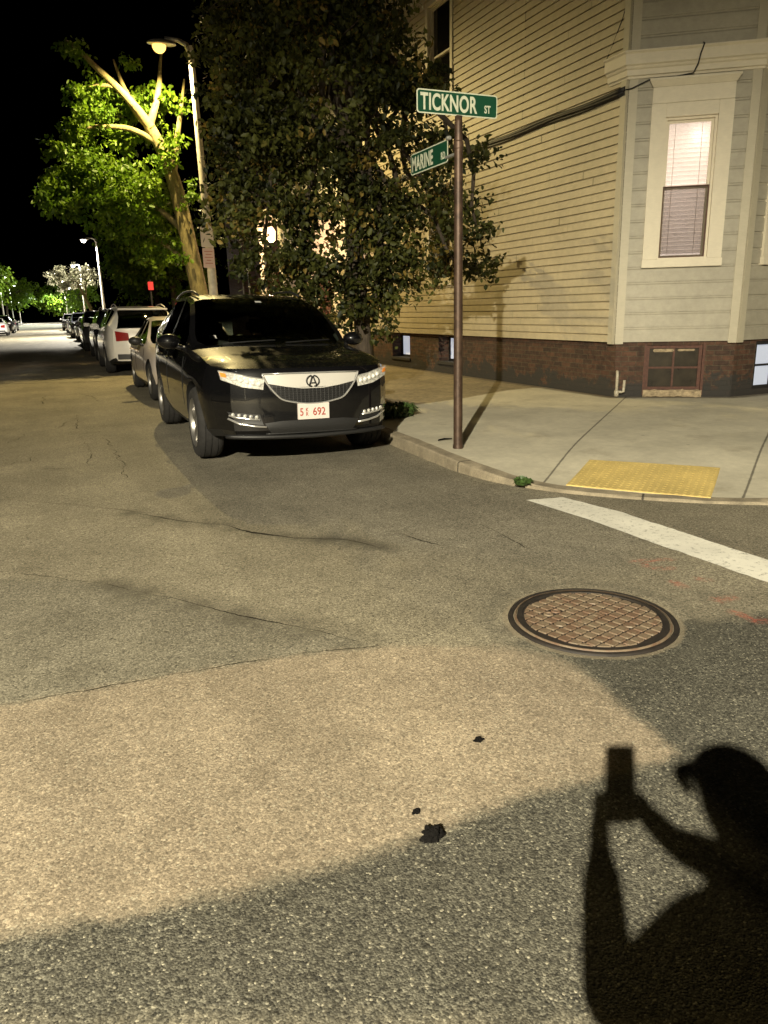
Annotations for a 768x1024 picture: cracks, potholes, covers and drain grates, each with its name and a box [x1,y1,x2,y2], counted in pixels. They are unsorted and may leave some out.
manhole cover [508,588,680,657]
crack [4,499,376,547]
crack [99,583,354,641]
crack [10,380,128,478]
